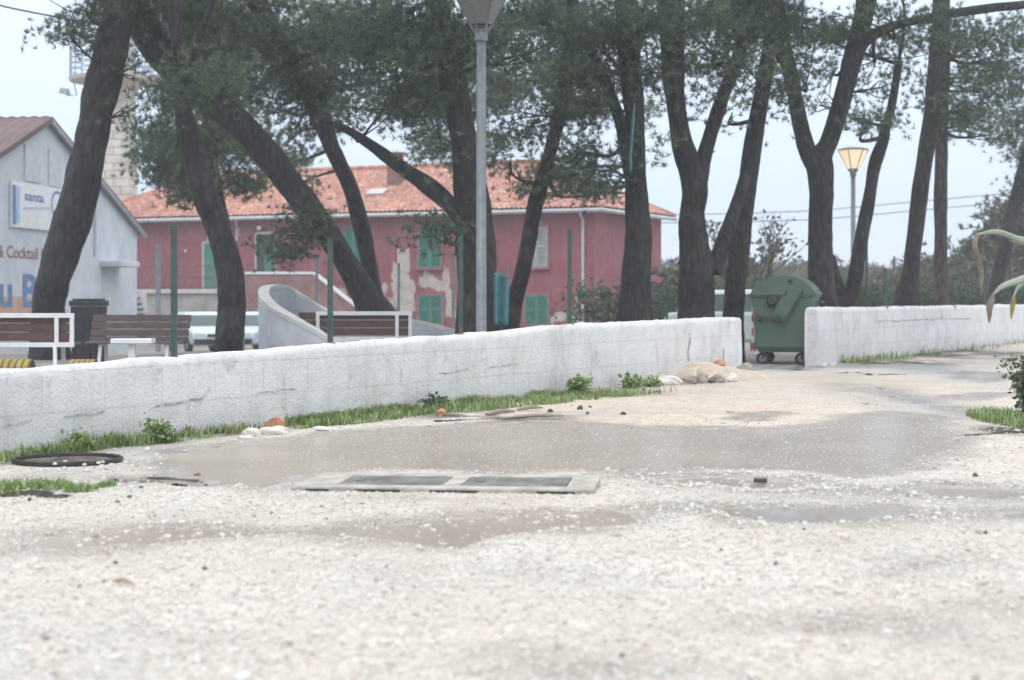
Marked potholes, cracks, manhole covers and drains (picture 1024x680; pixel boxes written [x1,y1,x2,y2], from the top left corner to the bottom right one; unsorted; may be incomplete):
pothole [19,508,655,552]
pothole [704,504,932,524]
manhole cover [11,452,123,467]
pothole [128,412,967,488]
manhole cover [292,472,600,495]
pothole [651,474,832,491]
